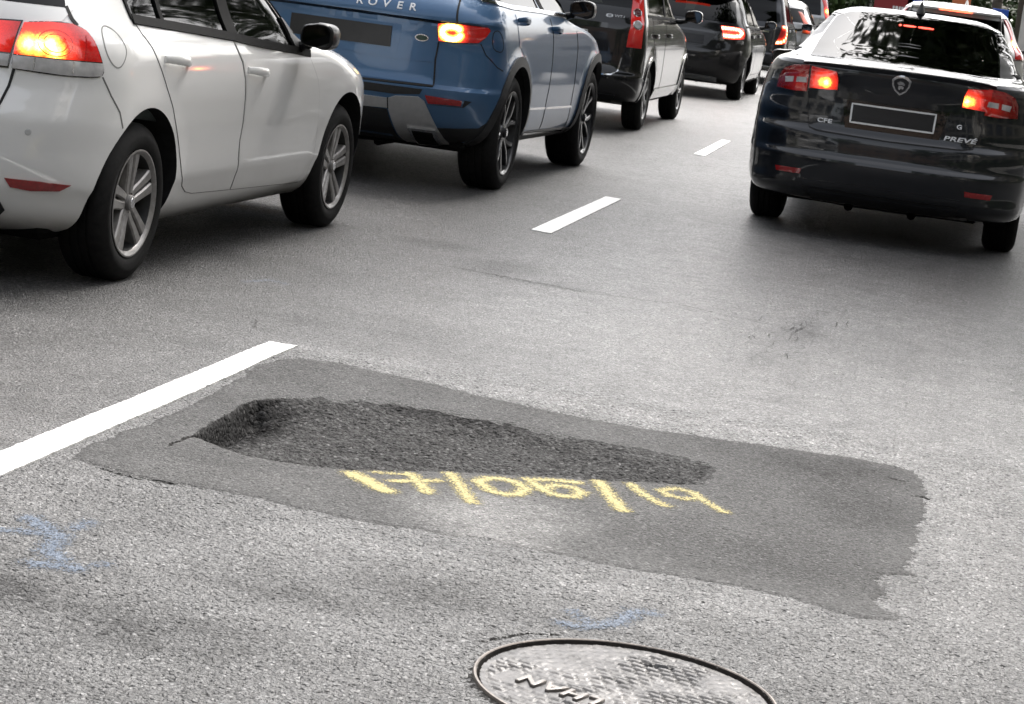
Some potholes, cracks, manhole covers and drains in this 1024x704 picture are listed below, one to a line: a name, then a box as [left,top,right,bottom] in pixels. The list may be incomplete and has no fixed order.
manhole cover [467,638,777,704]
pothole [189,396,716,486]
